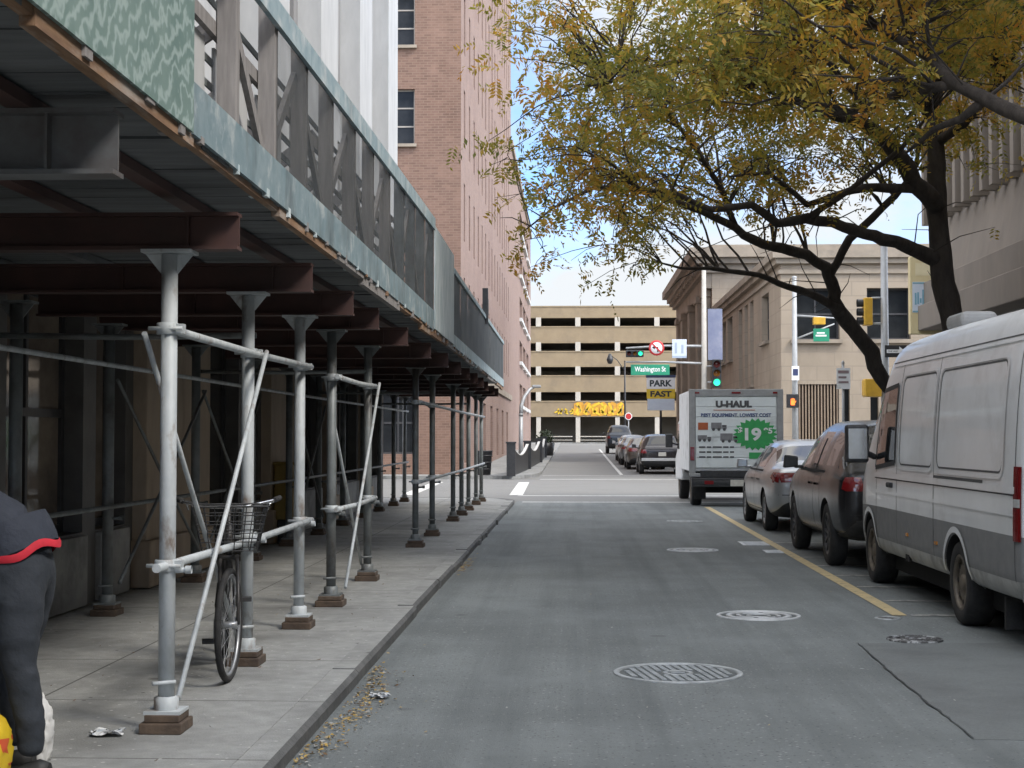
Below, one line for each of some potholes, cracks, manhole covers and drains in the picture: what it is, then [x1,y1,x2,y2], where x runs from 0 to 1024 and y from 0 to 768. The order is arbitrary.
manhole cover [886,635,944,643]
manhole cover [613,662,743,684]
manhole cover [716,610,801,621]
